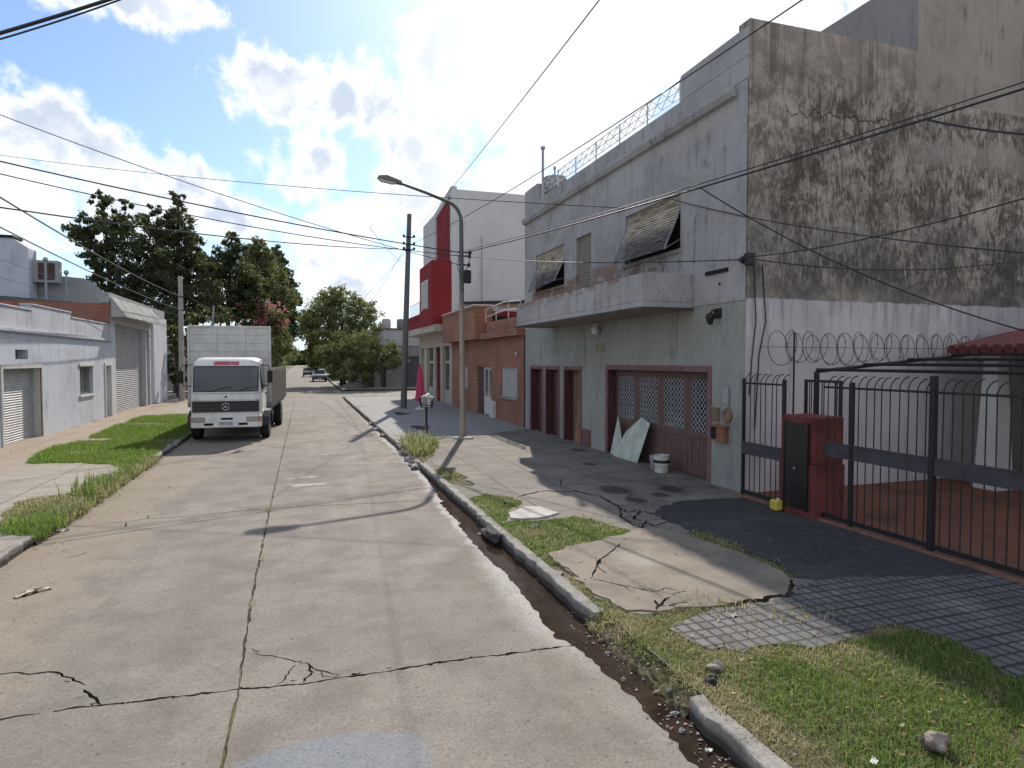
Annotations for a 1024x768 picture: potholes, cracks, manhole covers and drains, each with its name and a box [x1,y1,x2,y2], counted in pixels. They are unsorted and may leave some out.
crack [721,580,794,606]
crack [250,648,340,686]
crack [516,479,687,610]
crack [0,671,101,707]
